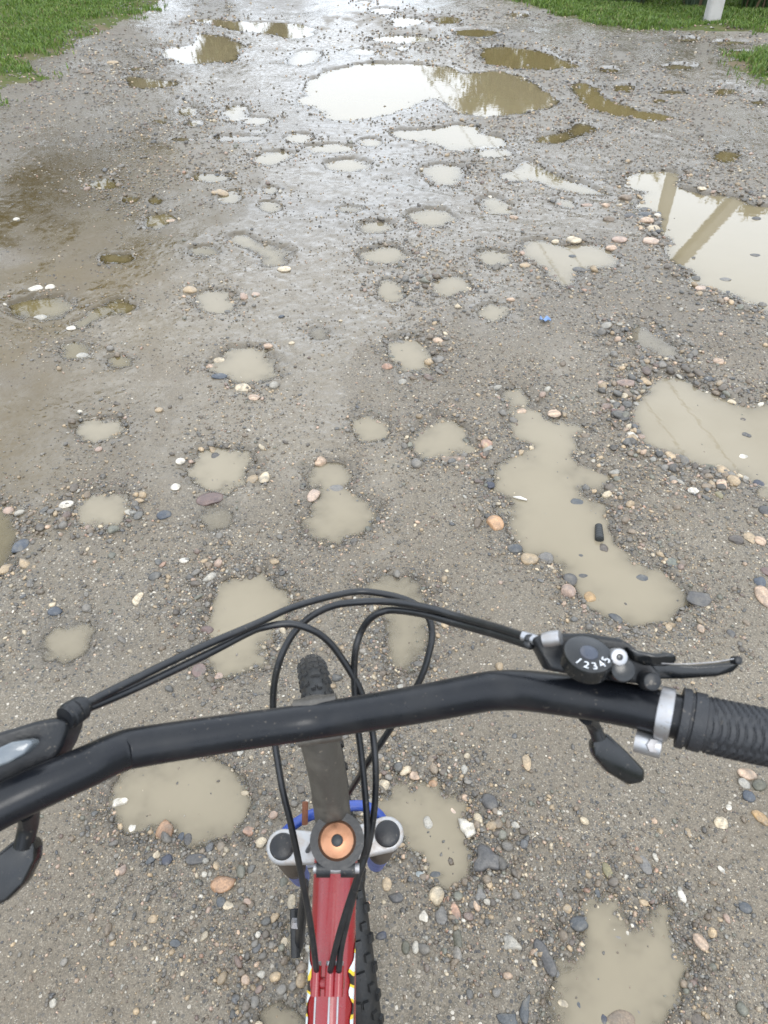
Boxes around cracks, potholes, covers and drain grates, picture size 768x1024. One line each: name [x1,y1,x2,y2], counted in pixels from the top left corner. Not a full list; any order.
pothole [620,368,768,485]
pothole [81,753,285,880]
pothole [199,340,294,391]
pothole [292,59,565,122]
pothole [351,752,510,900]
pothole [22,611,105,671]
pothole [480,378,703,633]
pothole [510,235,628,288]
pothole [377,328,448,379]
pothole [63,413,133,446]
pothole [0,289,87,325]
pothole [59,483,139,537]
